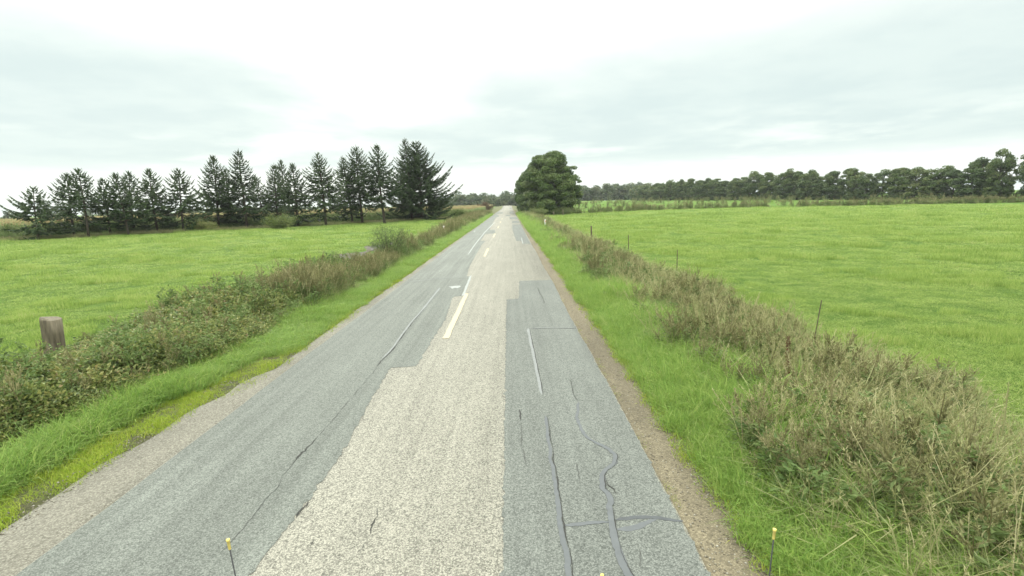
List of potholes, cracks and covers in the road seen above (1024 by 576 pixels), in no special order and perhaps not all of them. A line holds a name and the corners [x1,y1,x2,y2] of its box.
crack [221,288,440,552]
